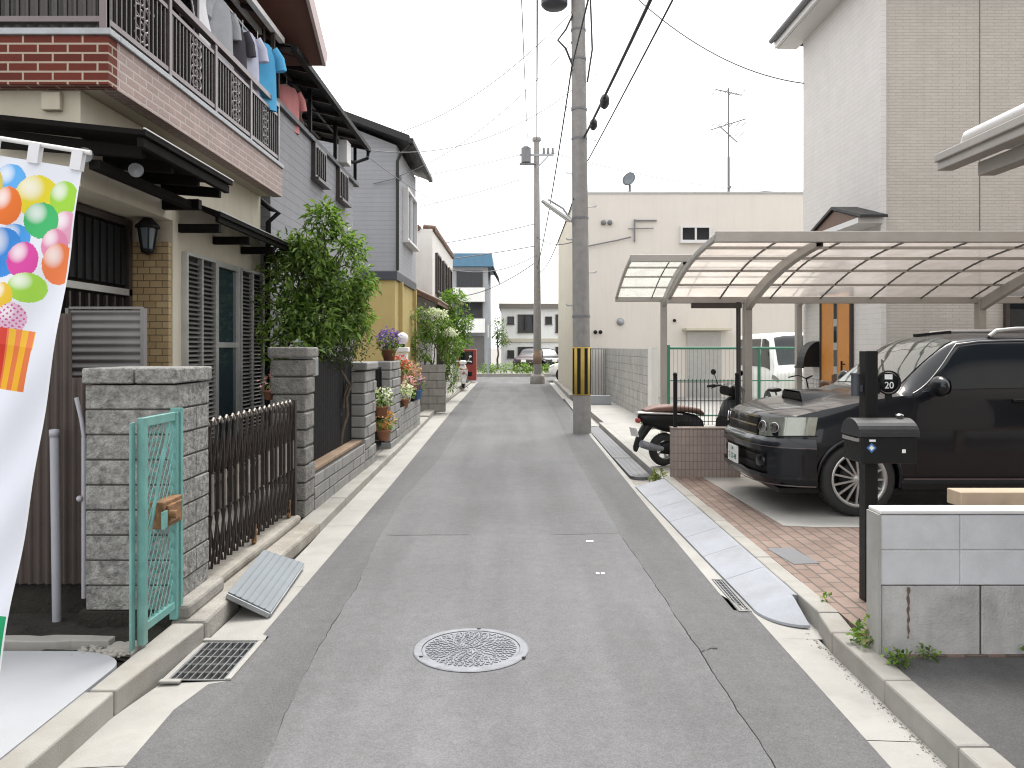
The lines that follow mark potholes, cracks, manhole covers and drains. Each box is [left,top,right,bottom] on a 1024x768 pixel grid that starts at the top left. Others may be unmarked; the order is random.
manhole cover [413,628,529,672]
utility cover [767,547,820,565]
drain grate [712,580,752,612]
drain grate [168,642,257,683]
crack [622,538,776,768]
